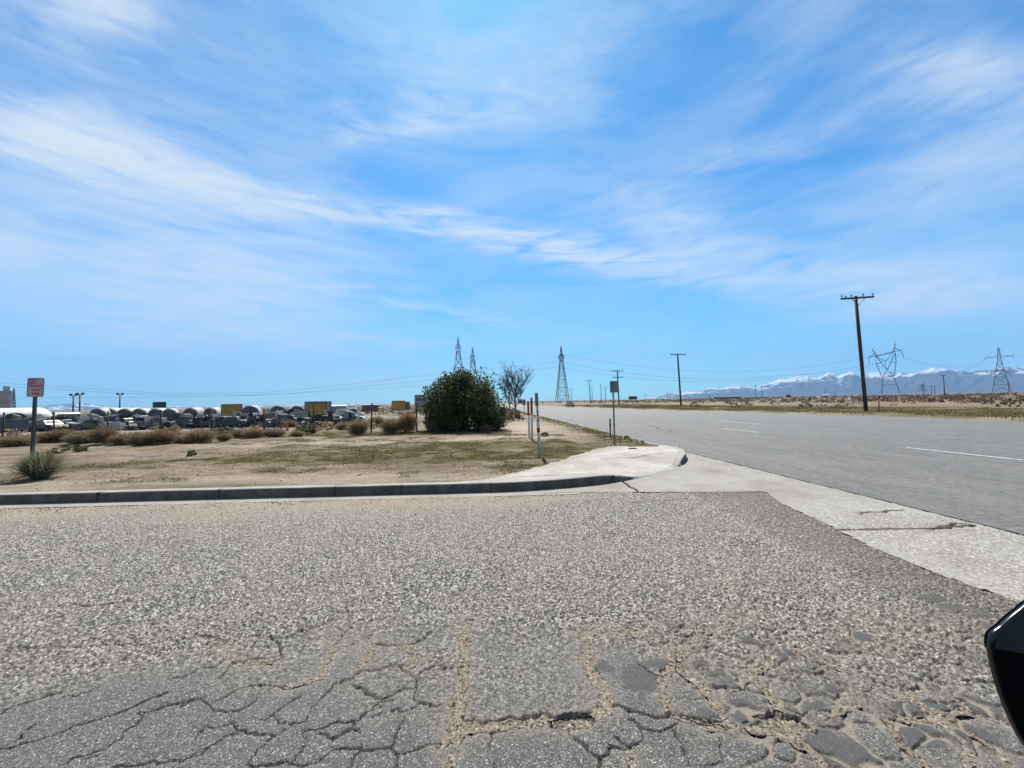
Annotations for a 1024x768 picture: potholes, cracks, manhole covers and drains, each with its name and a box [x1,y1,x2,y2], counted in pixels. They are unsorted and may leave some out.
crack [198,610,1013,768]
